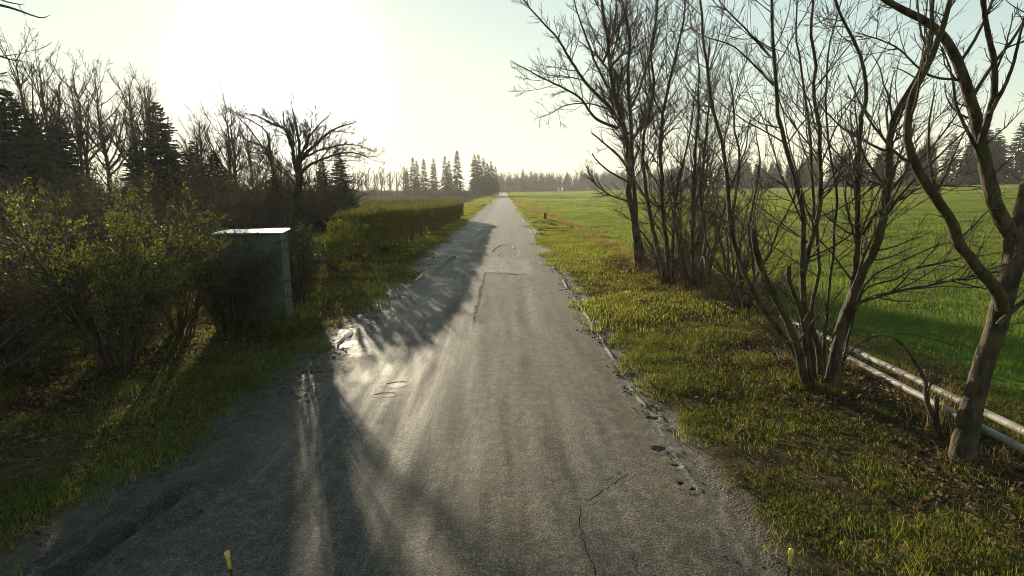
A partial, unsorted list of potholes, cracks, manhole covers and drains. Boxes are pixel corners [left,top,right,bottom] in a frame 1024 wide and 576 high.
crack [569,461,651,576]
pothole [681,483,703,495]
pothole [646,443,674,455]
pothole [381,379,411,388]
pothole [666,460,686,470]
pothole [671,478,692,490]
pothole [370,390,401,398]
